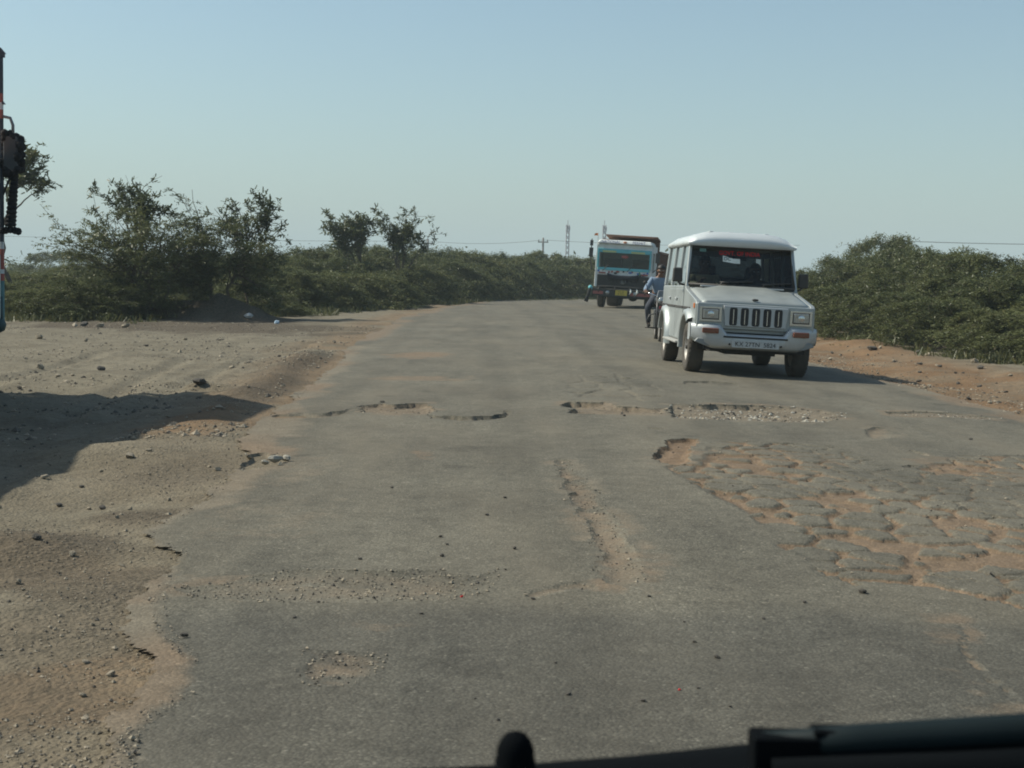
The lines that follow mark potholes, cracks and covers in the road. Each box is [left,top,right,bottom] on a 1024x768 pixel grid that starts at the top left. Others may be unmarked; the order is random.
pothole [559,401,668,415]
pothole [664,403,848,423]
pothole [356,403,437,414]
crack [644,410,1024,702]
